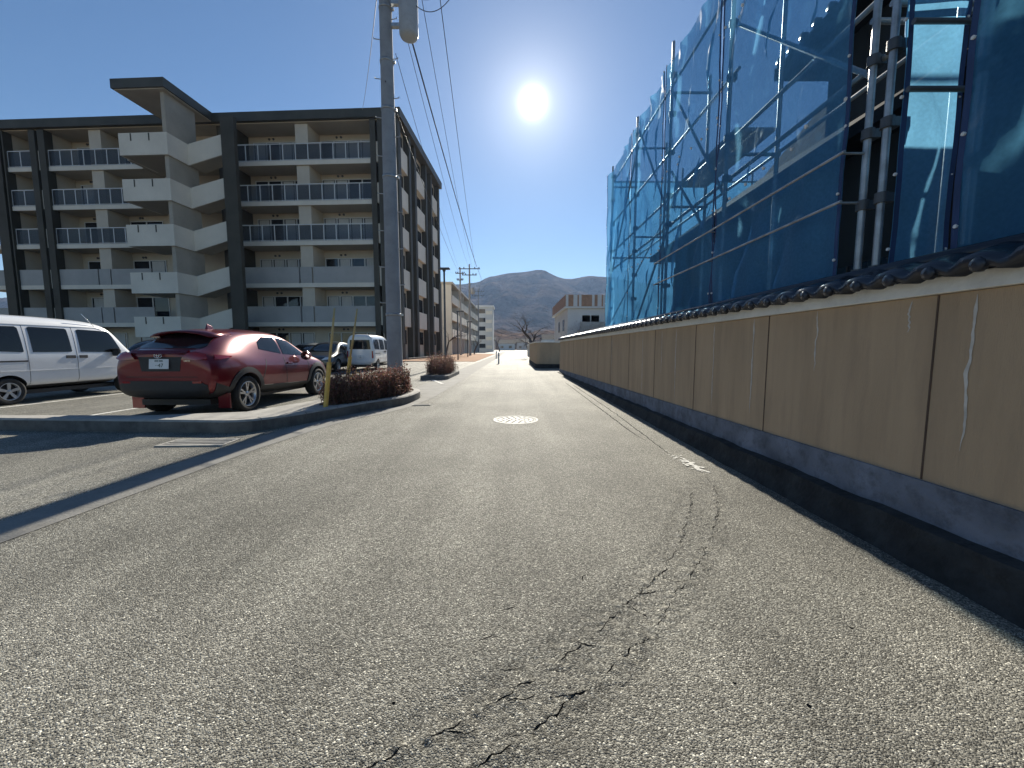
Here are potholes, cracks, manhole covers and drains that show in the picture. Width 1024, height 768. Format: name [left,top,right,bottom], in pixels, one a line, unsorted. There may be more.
crack [366,493,693,768]
manhole cover [493,416,538,424]
